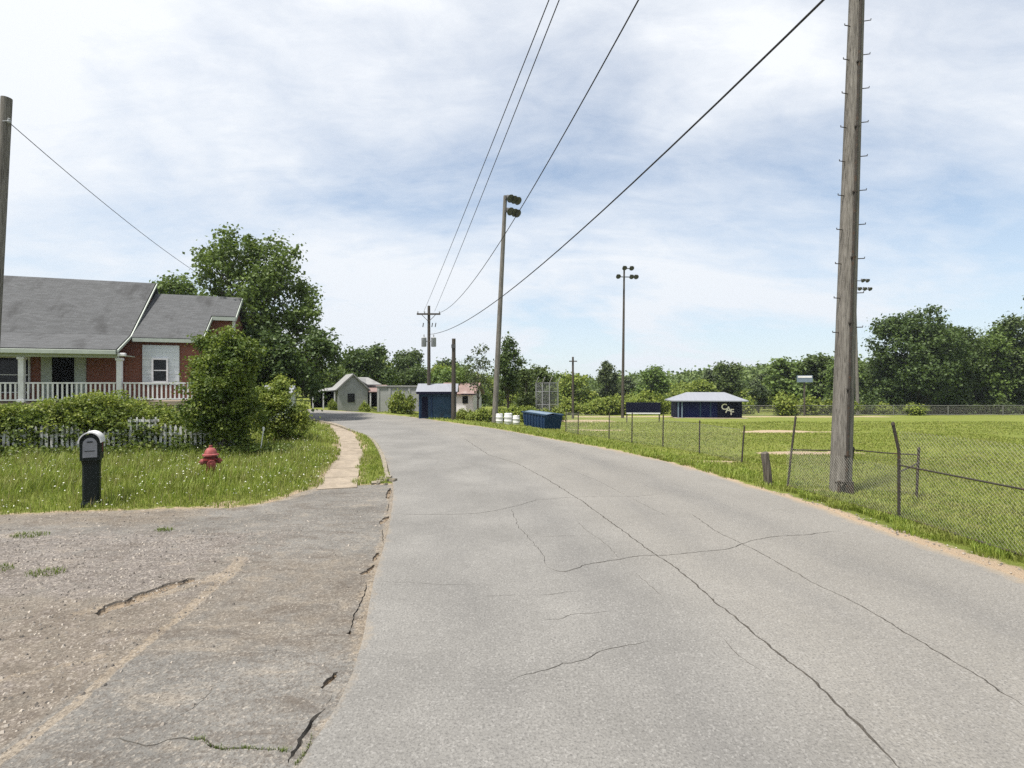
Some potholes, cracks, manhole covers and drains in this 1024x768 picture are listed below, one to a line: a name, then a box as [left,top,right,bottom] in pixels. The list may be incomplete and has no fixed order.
crack [288,696,332,767]
crack [109,691,271,750]
crack [415,439,1022,767]
